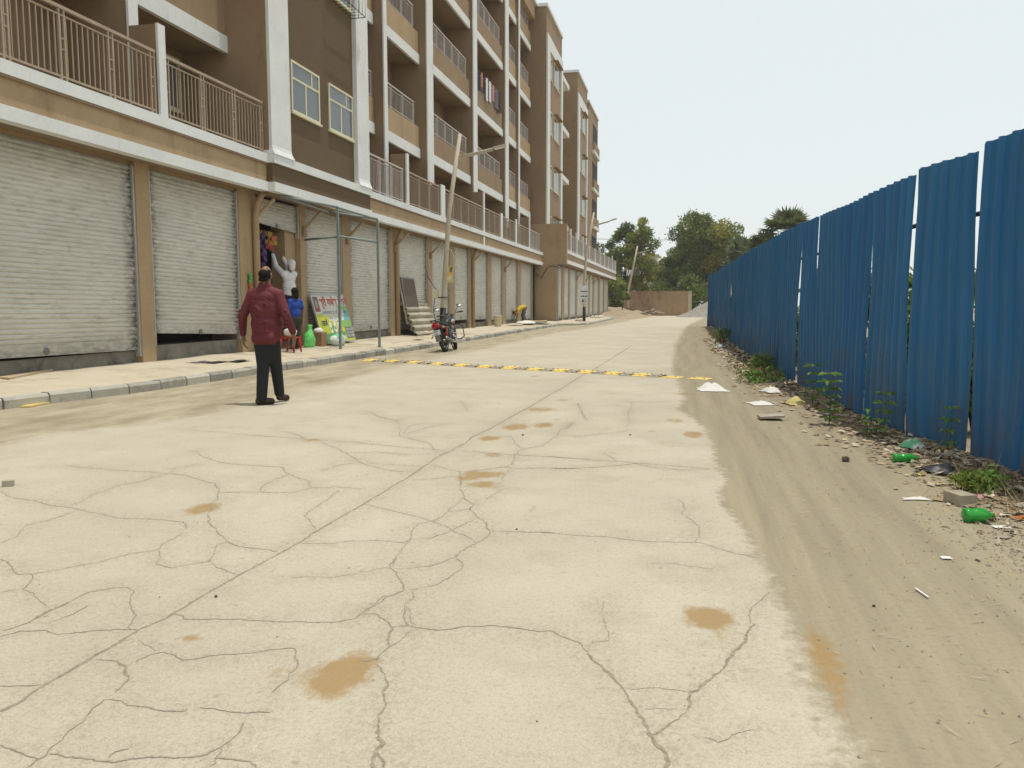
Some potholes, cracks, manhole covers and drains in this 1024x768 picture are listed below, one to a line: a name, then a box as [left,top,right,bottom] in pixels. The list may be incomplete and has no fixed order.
crack [1,659,270,767]
crack [176,414,770,768]
crack [0,454,359,692]
